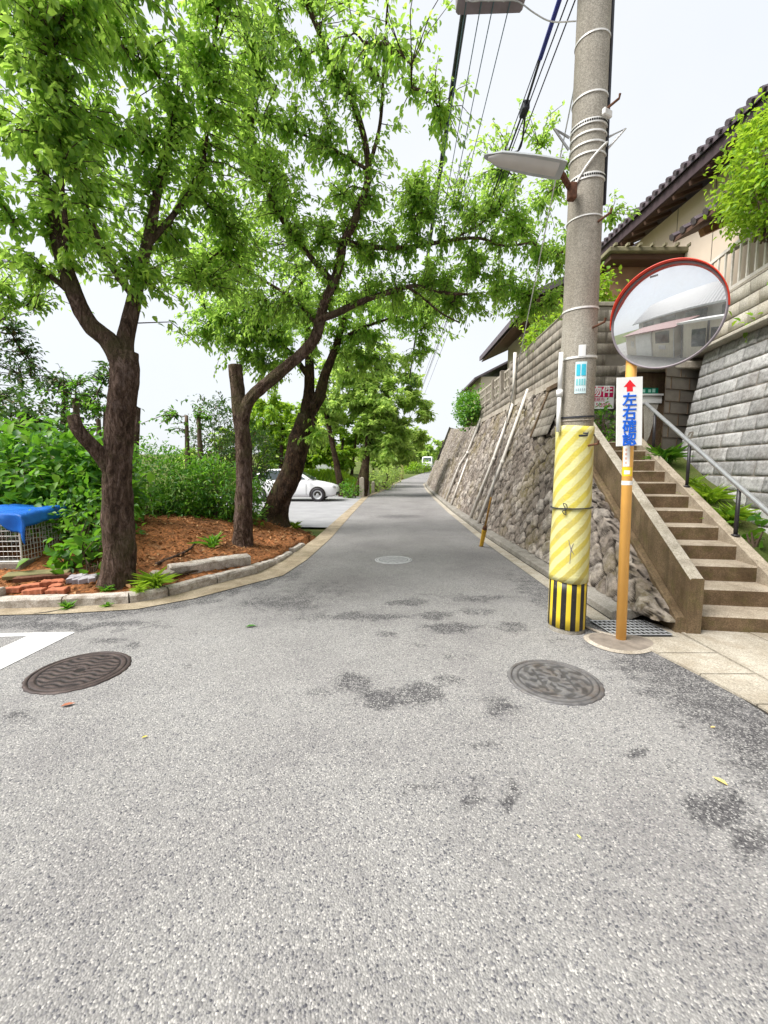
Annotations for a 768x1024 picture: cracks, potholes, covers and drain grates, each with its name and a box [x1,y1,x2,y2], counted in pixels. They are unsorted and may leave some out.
drain grate [590,620,672,635]
manhole cover [507,659,605,706]
manhole cover [375,556,413,564]
manhole cover [21,651,132,695]
